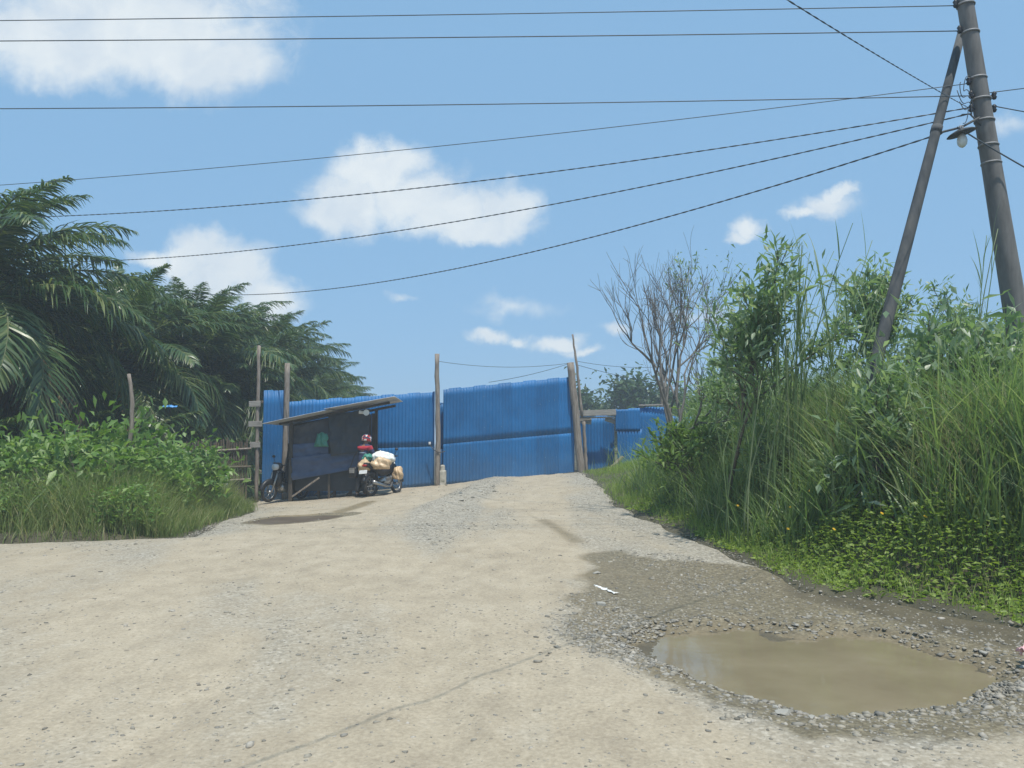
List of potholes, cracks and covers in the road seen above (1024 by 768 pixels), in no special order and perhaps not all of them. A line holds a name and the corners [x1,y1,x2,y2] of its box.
pothole [617,617,1020,717]
